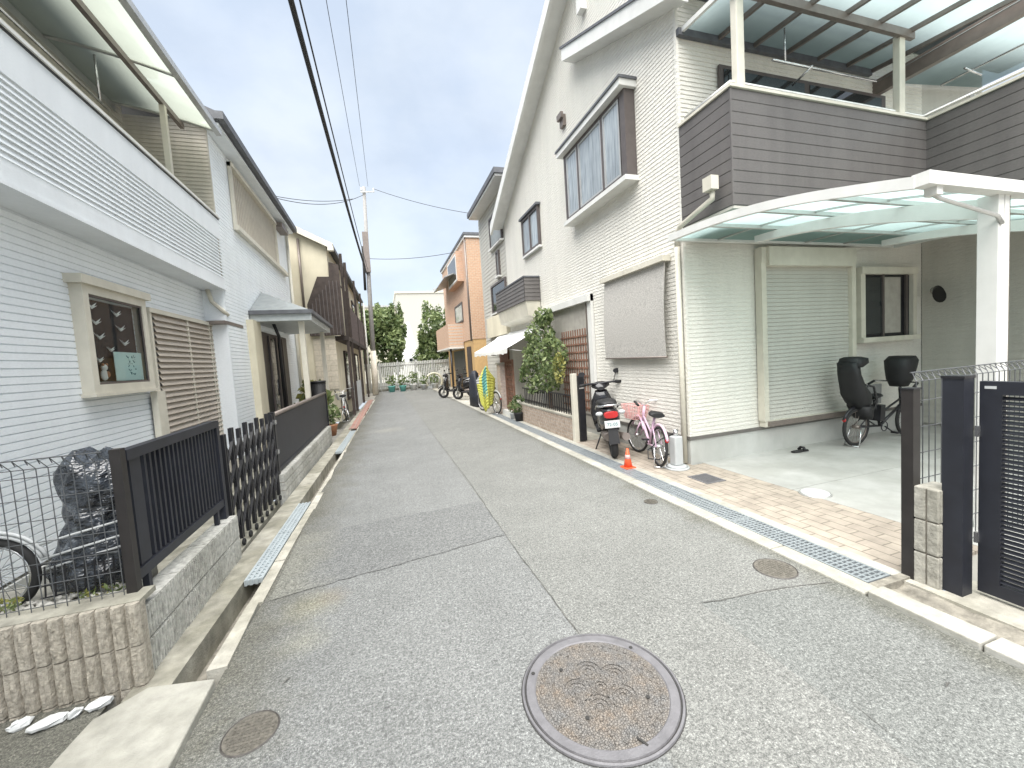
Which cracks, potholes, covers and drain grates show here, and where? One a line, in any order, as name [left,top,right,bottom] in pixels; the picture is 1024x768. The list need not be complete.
drain grate [656,485,750,522]
manhole cover [521,634,687,768]
drain grate [608,463,672,488]
manhole cover [219,710,280,758]
drain grate [733,517,890,583]
crack [700,582,829,603]
manhole cover [753,558,799,579]
